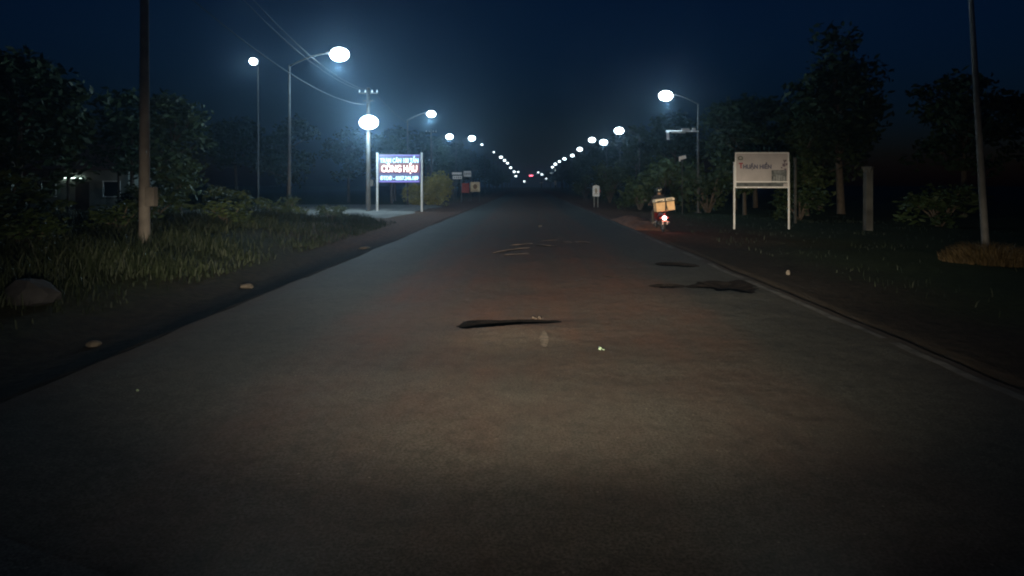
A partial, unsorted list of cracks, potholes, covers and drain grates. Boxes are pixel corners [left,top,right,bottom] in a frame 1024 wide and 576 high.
pothole [456,316,561,329]
crack [493,240,589,256]
